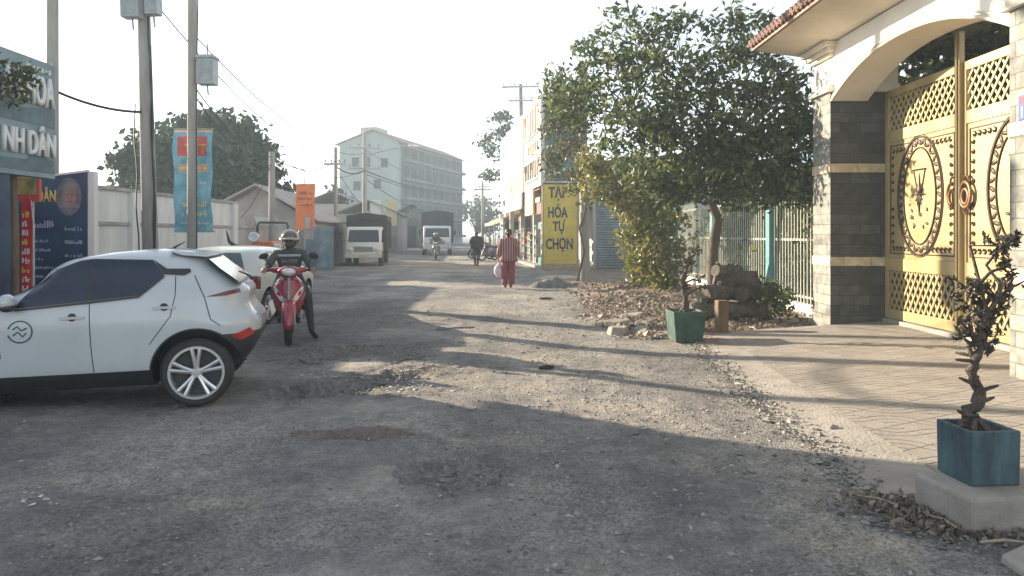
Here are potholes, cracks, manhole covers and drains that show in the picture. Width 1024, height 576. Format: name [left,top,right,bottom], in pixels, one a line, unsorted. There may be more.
pothole [290,426,416,441]
pothole [391,458,500,495]
pothole [362,373,421,384]
pothole [257,380,407,401]
